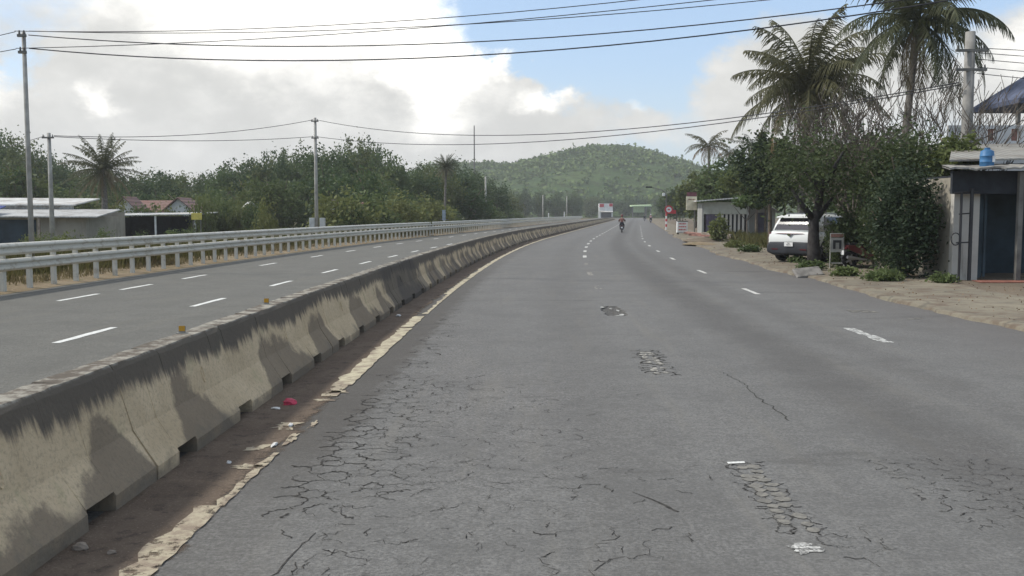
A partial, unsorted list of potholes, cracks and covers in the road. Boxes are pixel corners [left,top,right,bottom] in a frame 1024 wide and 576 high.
pothole [600,306,628,316]
crack [723,372,790,421]
crack [869,458,1024,530]
crack [261,375,713,576]
